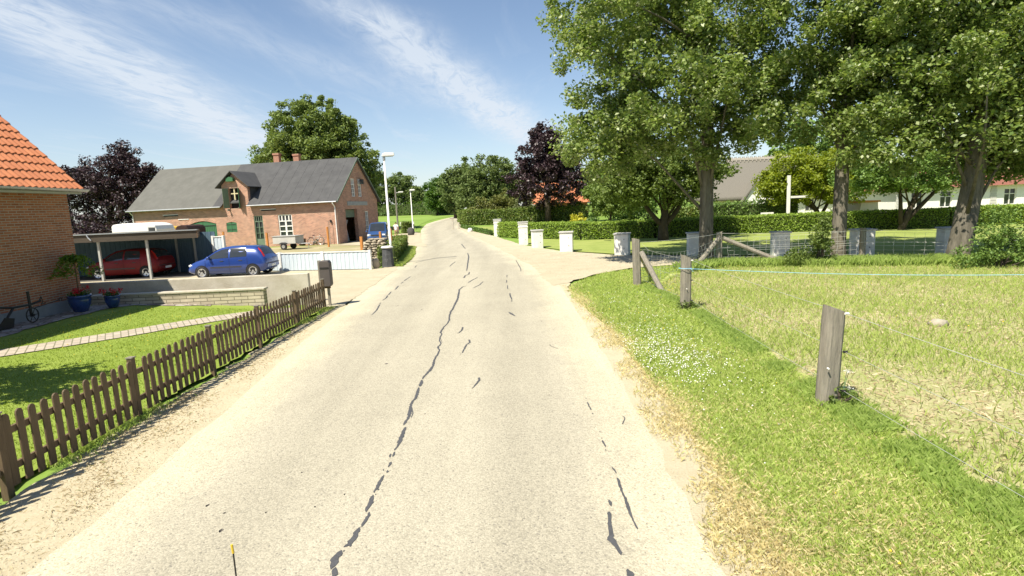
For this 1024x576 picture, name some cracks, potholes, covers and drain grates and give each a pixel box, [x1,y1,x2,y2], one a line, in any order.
crack [586,398,638,576]
crack [330,244,481,576]
